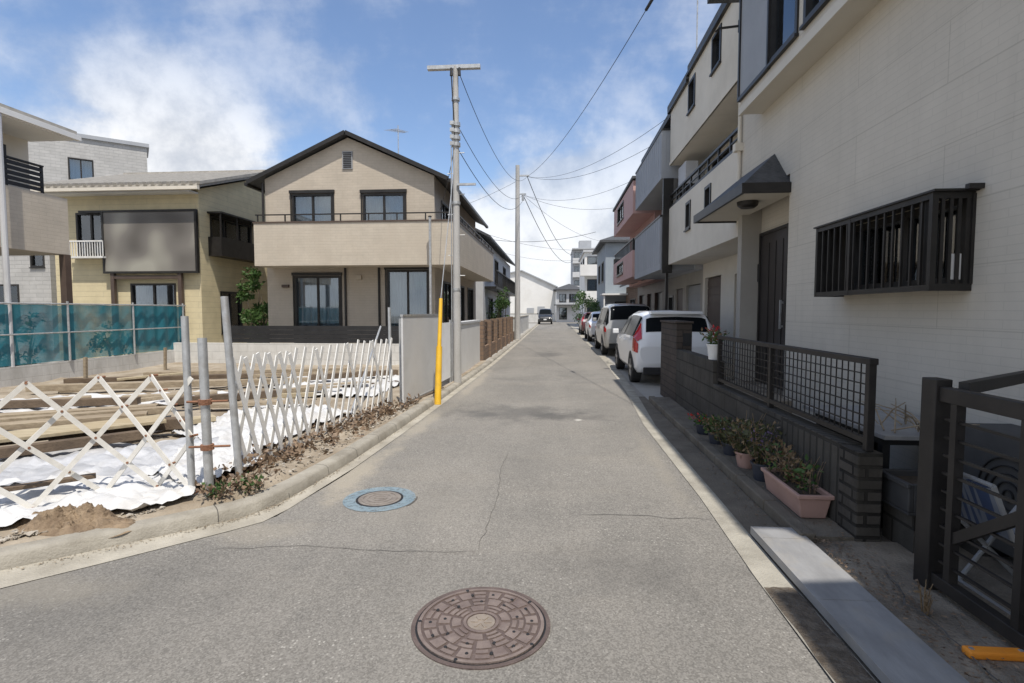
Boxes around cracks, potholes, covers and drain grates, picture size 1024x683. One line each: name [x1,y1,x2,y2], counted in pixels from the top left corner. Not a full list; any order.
manhole cover [411,587,550,670]
manhole cover [343,487,418,512]
